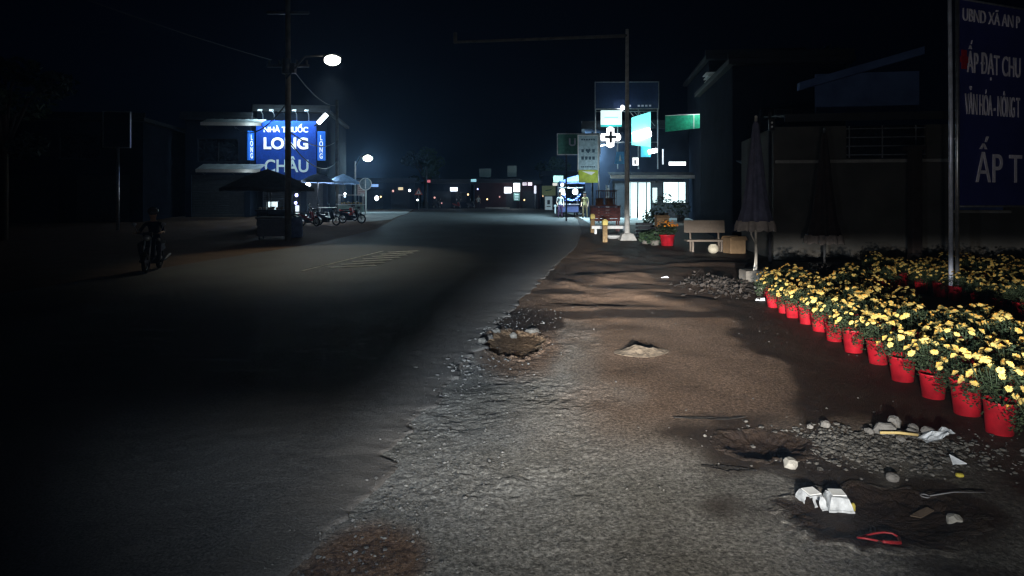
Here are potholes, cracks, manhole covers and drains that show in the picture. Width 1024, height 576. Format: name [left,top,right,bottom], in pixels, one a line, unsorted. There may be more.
pothole [709,427,822,464]
pothole [481,328,552,362]
pothole [763,480,996,558]
